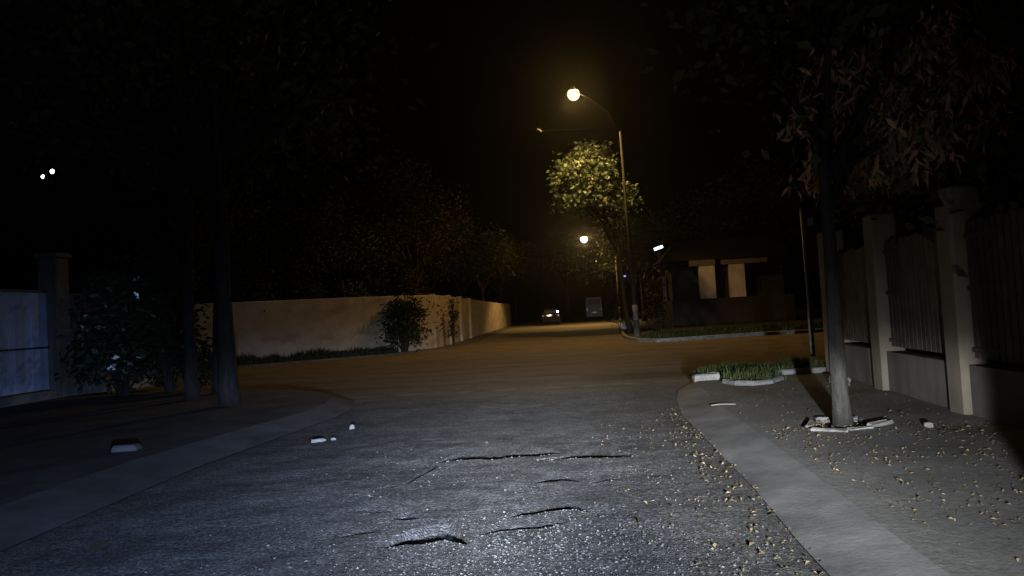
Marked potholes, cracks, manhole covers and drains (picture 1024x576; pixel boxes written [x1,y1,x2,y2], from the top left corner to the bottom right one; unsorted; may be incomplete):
crack [333,507,421,538]
crack [372,444,637,535]
